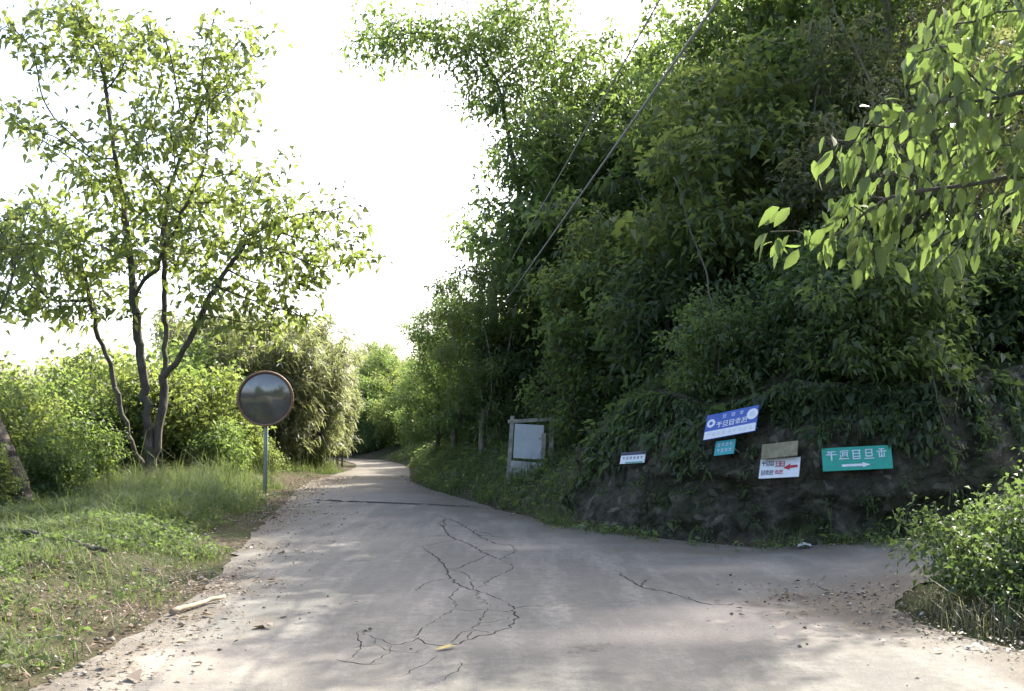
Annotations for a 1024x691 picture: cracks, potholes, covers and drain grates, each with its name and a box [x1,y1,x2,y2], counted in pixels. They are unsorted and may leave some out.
crack [619,573,732,605]
crack [338,515,525,680]
